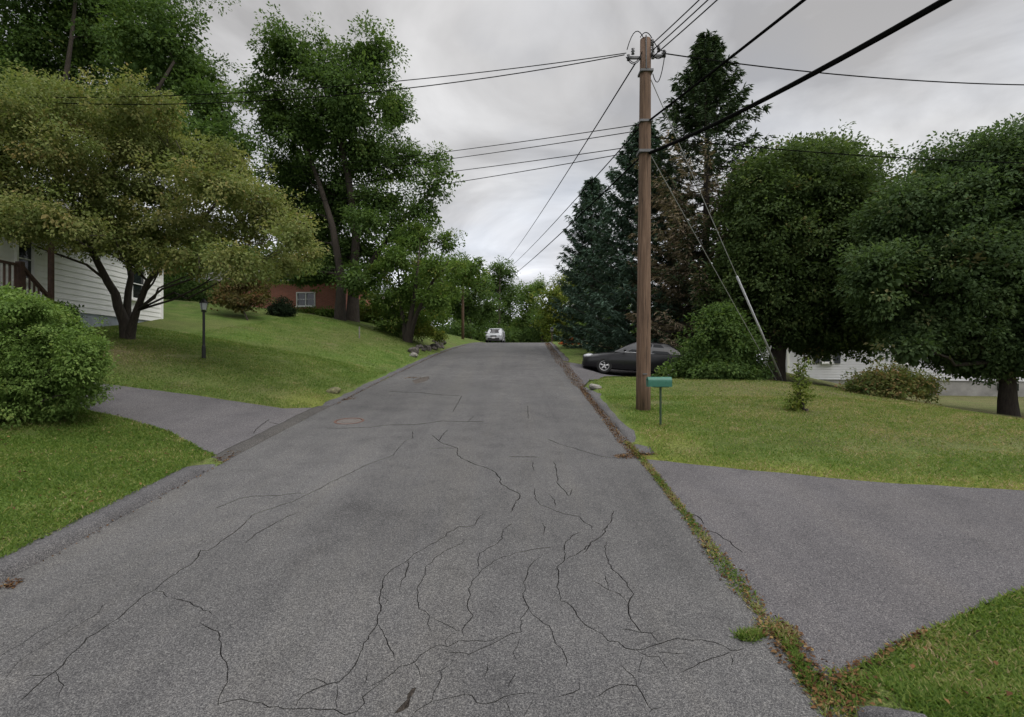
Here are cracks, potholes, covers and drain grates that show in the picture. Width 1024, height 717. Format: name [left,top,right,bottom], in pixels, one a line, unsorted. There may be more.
crack [12,391,742,716]
